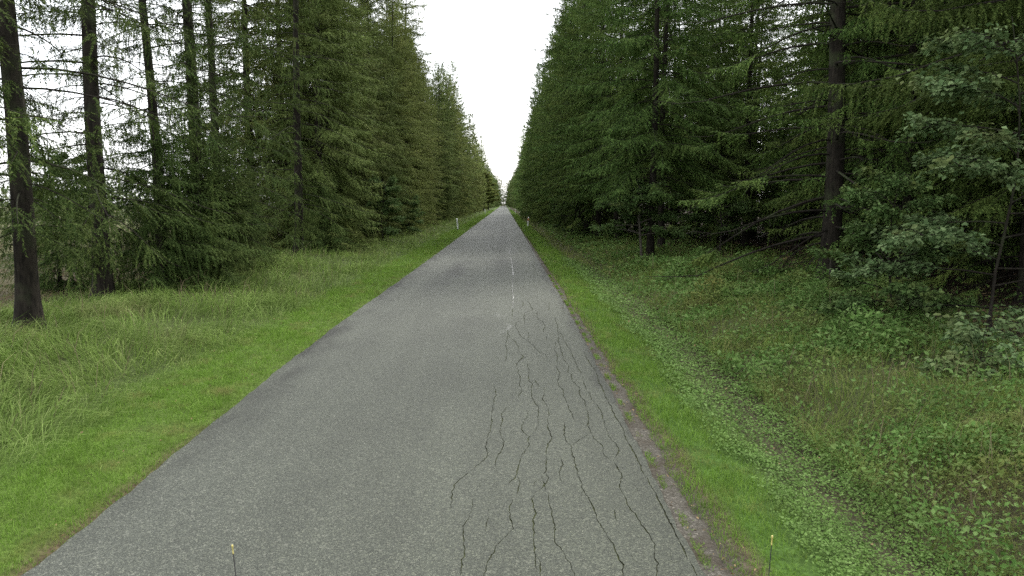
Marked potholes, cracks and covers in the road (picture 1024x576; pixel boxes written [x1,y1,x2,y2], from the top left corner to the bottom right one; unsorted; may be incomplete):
crack [450,301,697,576]
